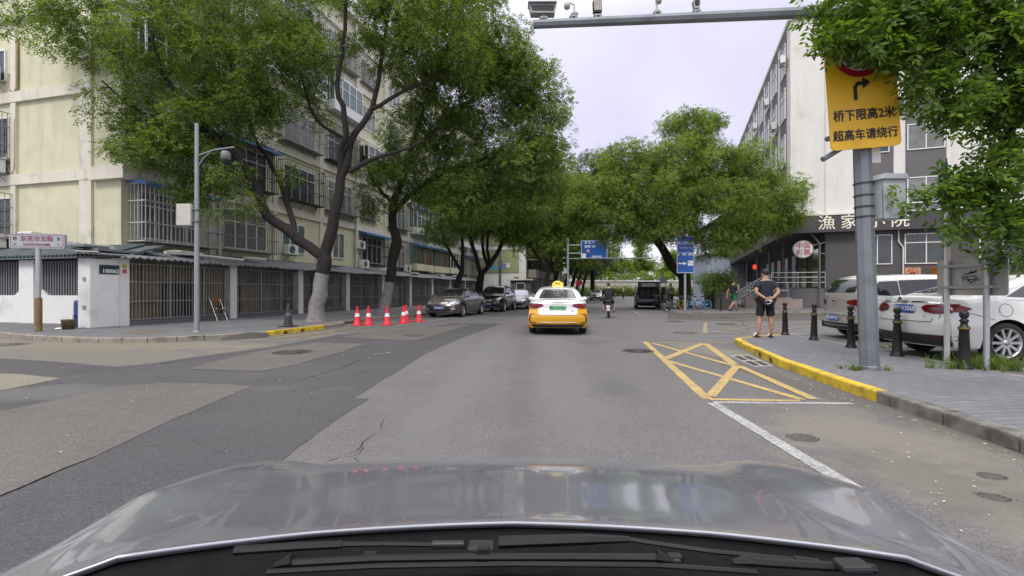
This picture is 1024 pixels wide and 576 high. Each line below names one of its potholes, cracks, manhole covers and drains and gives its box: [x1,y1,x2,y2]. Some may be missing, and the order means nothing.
drain grate [731,355,773,367]
crack [327,420,384,462]
